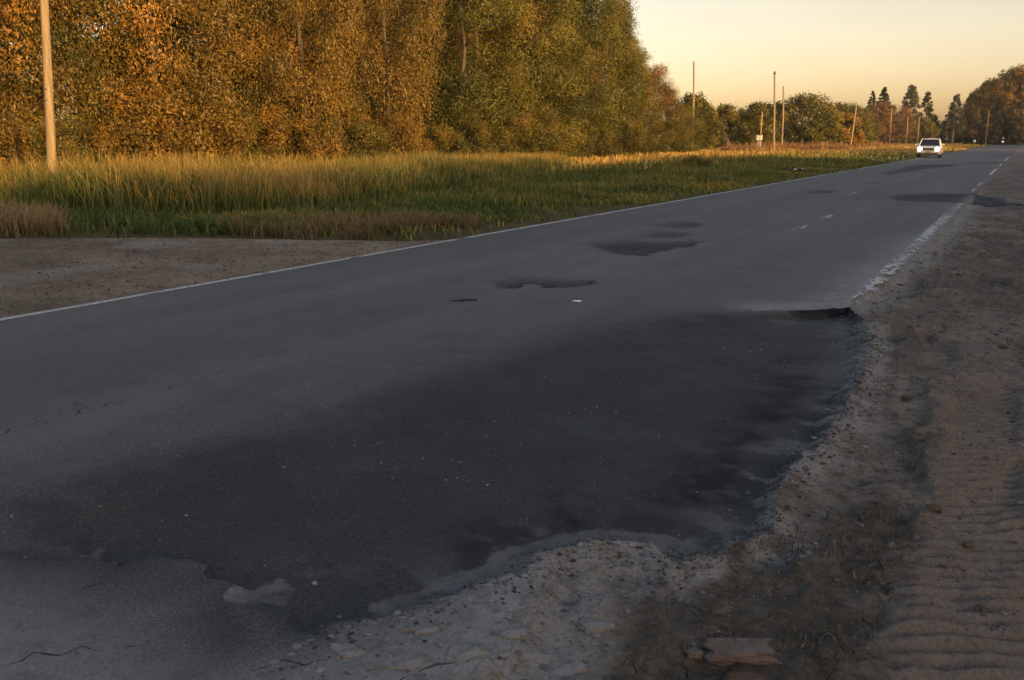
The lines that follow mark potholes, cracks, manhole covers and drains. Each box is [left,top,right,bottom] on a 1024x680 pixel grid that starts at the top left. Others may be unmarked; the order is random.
pothole [0,307,874,656]
crack [4,385,109,435]
crack [1,645,98,666]
pothole [582,240,706,256]
pothole [482,276,598,289]
pothole [633,231,694,239]
pothole [885,193,1024,207]
